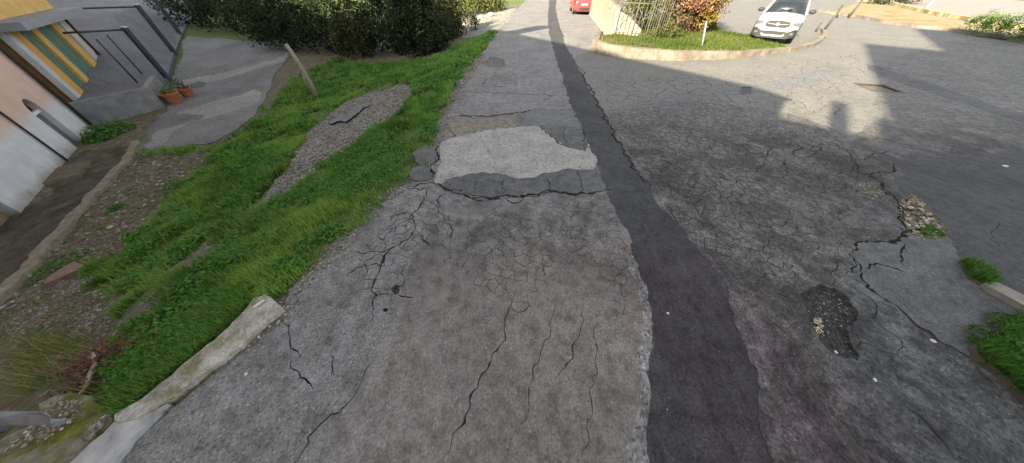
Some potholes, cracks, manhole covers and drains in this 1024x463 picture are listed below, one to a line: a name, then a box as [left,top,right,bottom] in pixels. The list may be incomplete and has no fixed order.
pothole [897,193,949,240]
crack [347,108,638,463]
crack [283,322,376,463]
pothole [798,283,860,361]
manhole cover [854,83,905,93]
crack [582,70,971,369]
crack [770,55,864,128]
